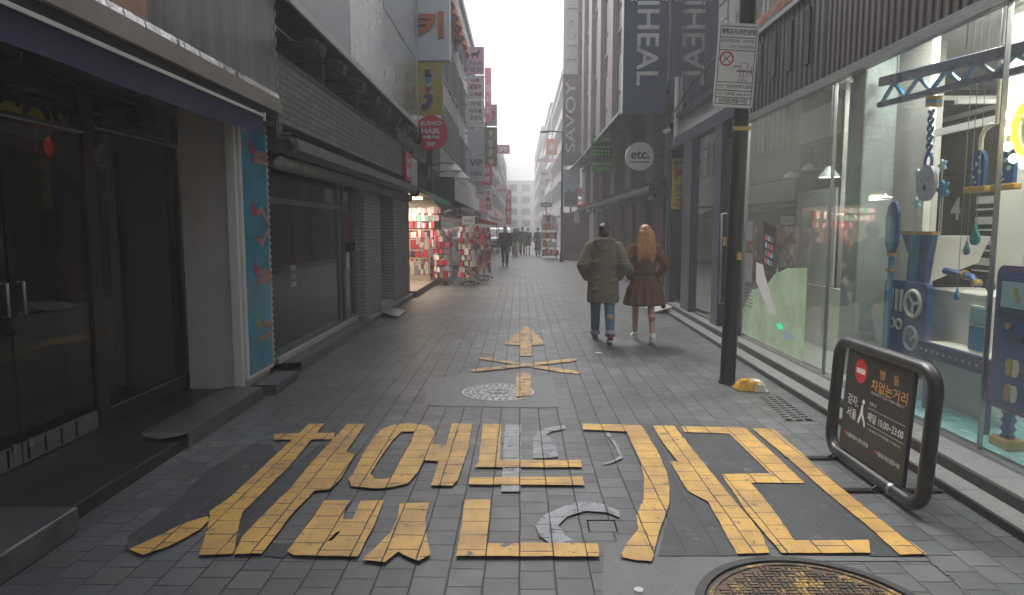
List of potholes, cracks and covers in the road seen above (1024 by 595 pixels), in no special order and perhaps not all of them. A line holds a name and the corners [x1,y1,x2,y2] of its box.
drain grate [755,395,816,422]
manhole cover [695,556,916,595]
manhole cover [462,384,534,401]
